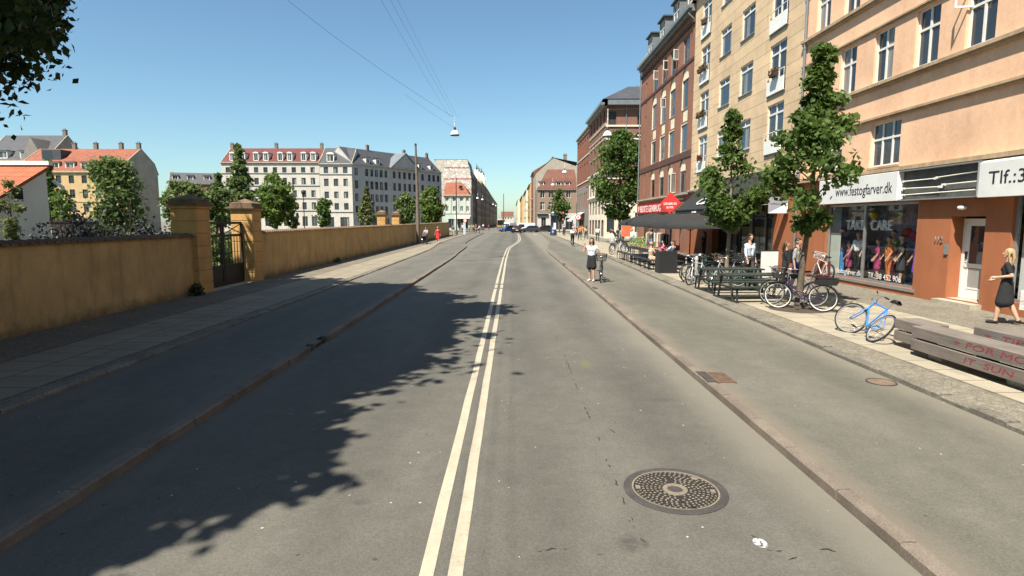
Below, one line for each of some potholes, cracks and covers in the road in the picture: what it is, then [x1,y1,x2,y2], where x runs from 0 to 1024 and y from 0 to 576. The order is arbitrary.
manhole cover [865,378,898,386]
manhole cover [623,468,729,515]
drain grate [696,371,737,384]
